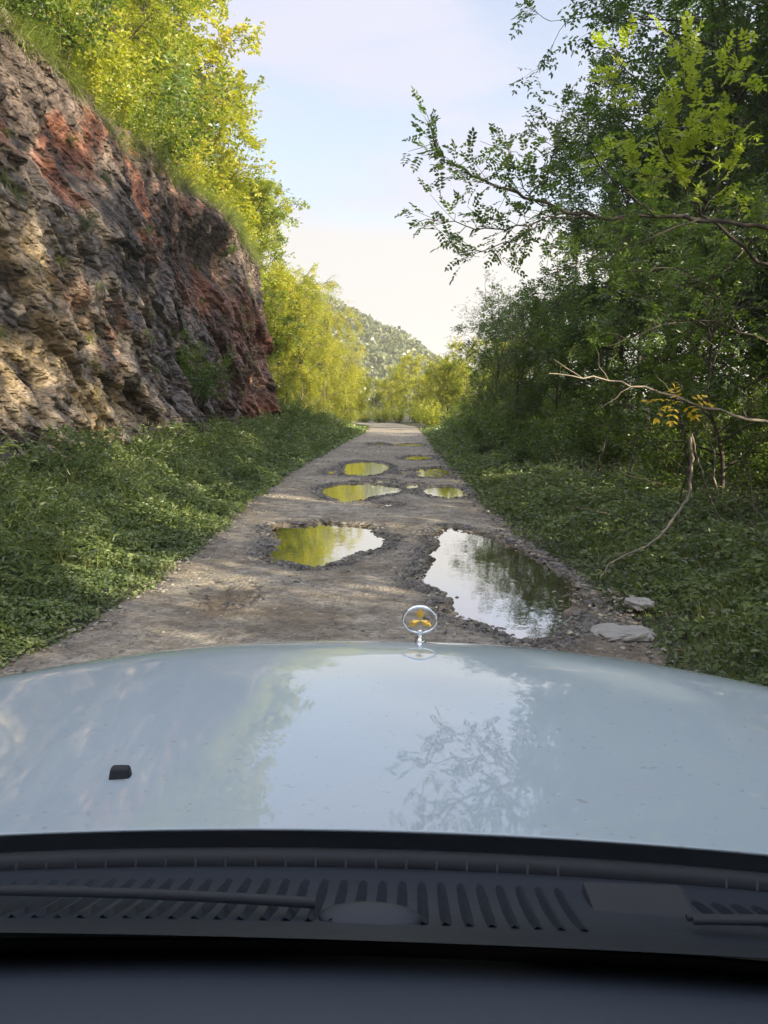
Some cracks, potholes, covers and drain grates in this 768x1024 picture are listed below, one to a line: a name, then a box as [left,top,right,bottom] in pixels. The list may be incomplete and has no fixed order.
pothole [333,461,392,476]
pothole [254,520,404,571]
pothole [314,481,410,504]
pothole [406,525,607,648]
pothole [404,466,463,479]
pothole [418,486,483,499]
